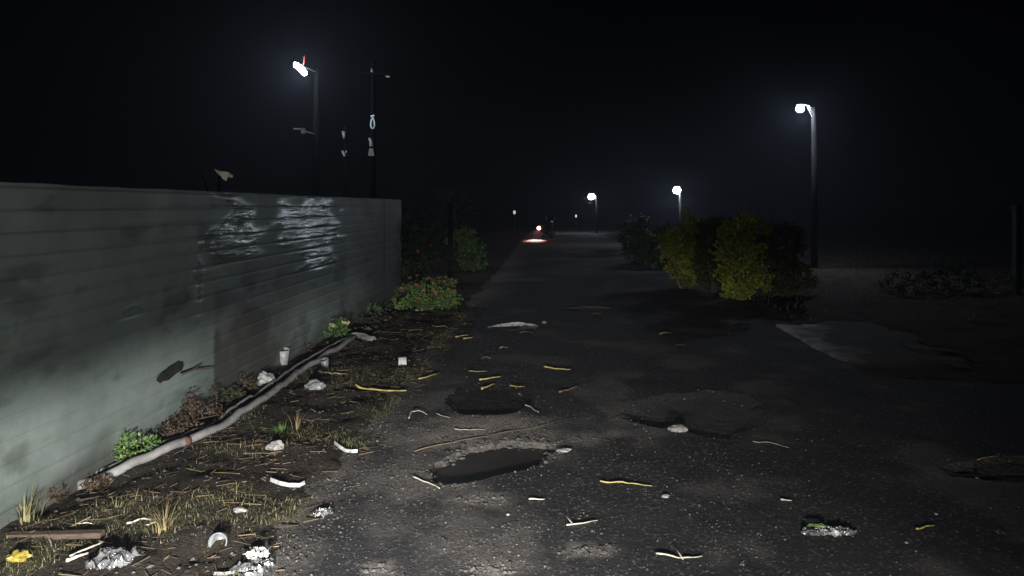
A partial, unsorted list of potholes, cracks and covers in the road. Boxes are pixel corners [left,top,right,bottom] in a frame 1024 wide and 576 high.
pothole [444,382,540,417]
pothole [429,437,565,485]
pothole [620,389,767,440]
pothole [938,453,1024,484]
